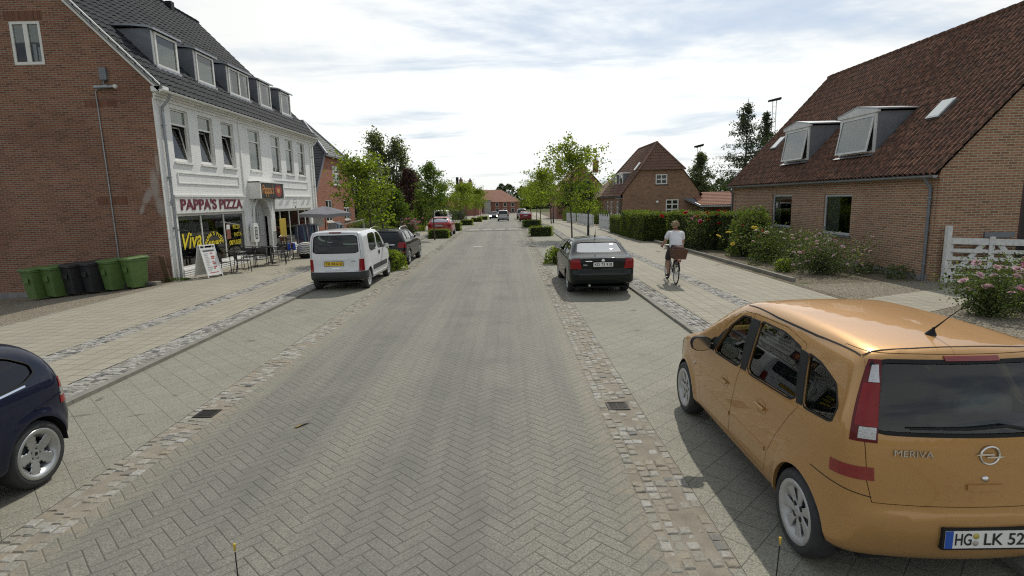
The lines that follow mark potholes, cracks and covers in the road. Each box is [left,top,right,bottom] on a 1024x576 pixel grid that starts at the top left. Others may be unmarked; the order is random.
drain grate [605,401,631,410]
drain grate [192,409,222,418]
